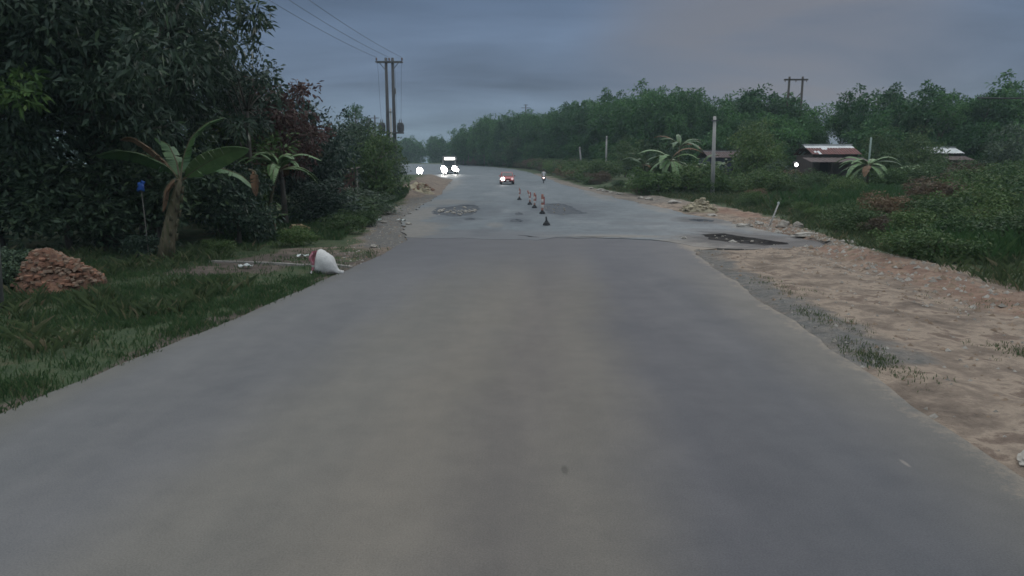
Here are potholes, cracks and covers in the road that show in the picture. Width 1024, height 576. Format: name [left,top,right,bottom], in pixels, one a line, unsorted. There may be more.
pothole [544,203,586,215]
pothole [432,205,480,217]
pothole [701,233,788,246]
